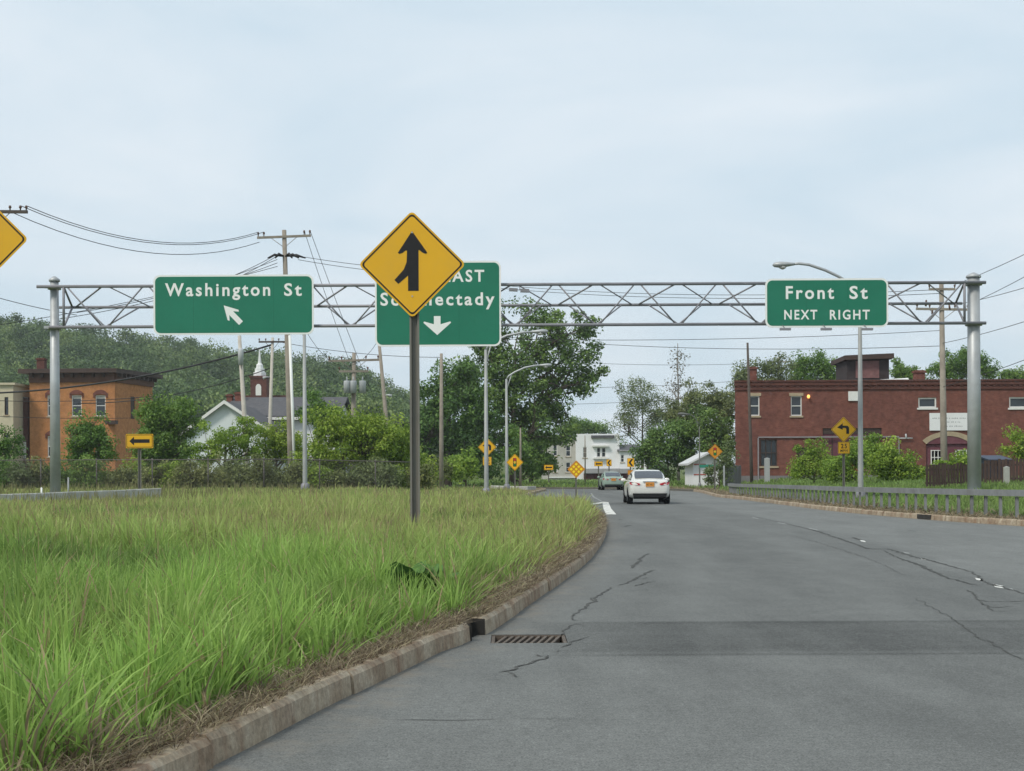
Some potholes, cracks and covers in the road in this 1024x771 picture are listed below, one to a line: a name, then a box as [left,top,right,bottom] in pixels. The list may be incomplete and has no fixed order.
crack [483,553,654,680]
crack [758,517,1024,660]
drain grate [491,634,568,643]
